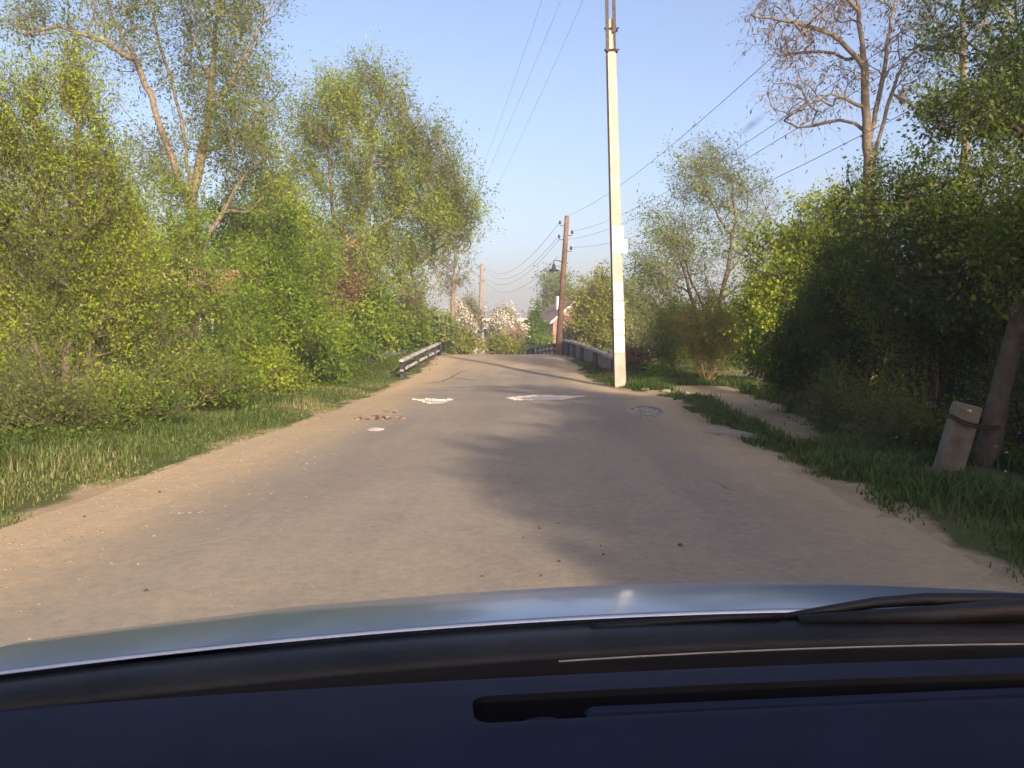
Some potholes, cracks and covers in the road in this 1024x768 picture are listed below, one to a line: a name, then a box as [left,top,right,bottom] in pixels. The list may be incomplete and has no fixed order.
crack [432,369,517,388]
